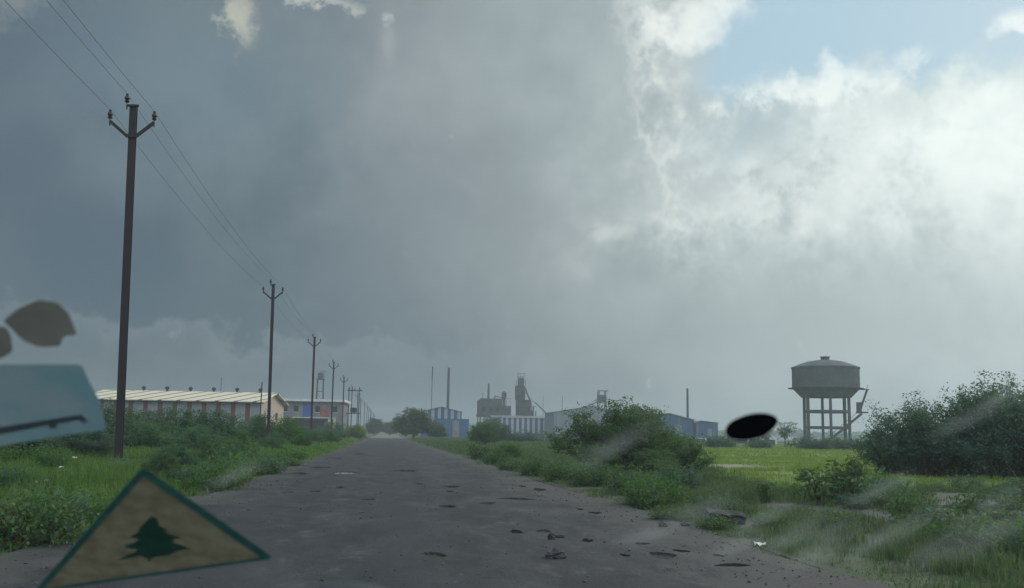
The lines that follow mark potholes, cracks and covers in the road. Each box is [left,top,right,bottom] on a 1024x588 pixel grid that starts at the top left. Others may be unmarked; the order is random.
pothole [649,552,677,560]
